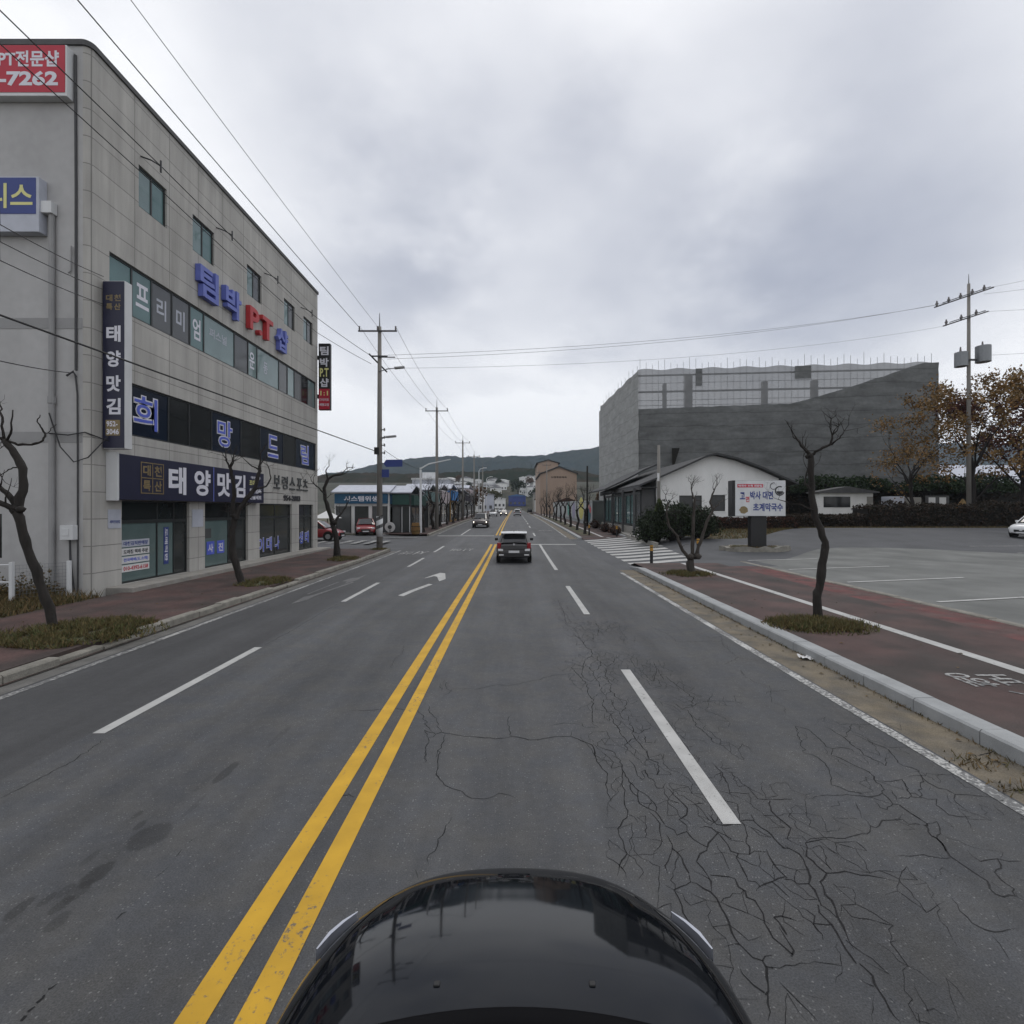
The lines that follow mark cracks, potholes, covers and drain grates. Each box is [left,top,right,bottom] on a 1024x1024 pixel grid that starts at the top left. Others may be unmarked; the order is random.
crack [20,983,58,1021]
crack [361,598,1024,1024]
